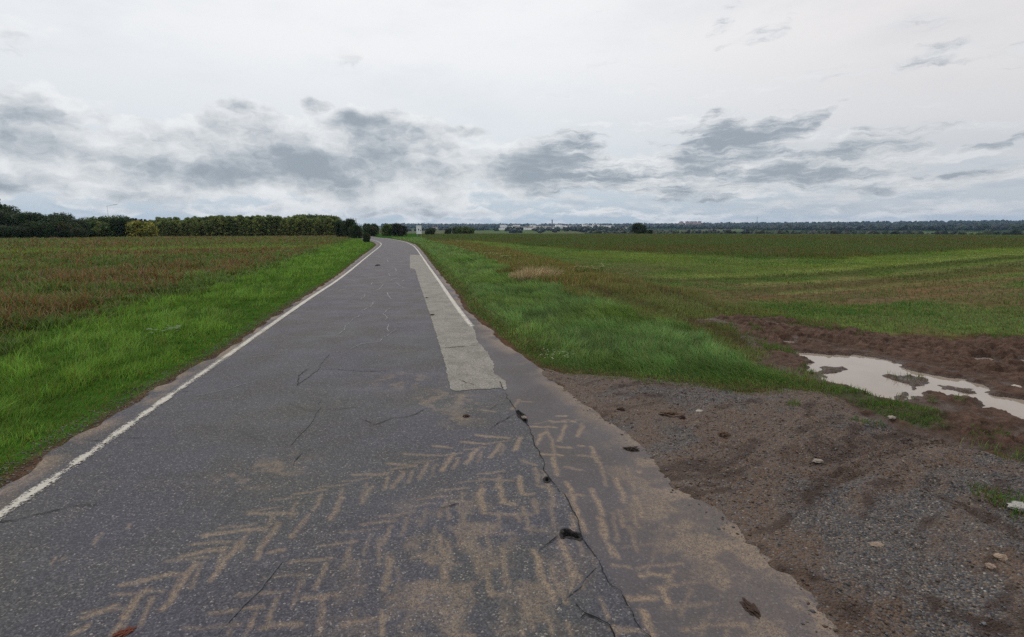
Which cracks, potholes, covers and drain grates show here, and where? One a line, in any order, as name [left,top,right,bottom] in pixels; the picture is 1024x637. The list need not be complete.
crack [492,382,651,637]
pothole [559,528,583,541]
